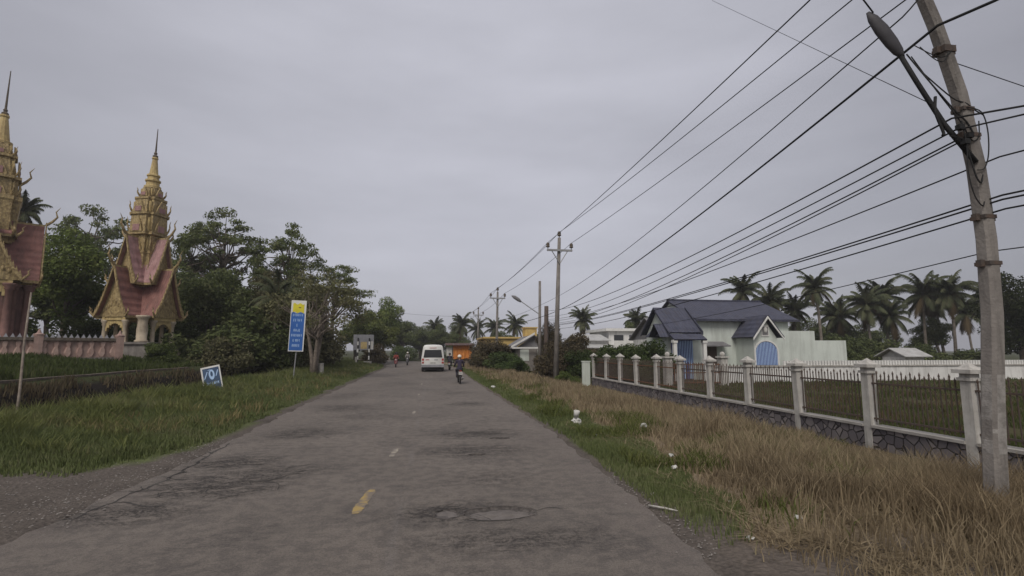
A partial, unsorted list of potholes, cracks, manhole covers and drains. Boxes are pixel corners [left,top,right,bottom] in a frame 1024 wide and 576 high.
pothole [461,505,537,521]
pothole [435,508,460,519]
